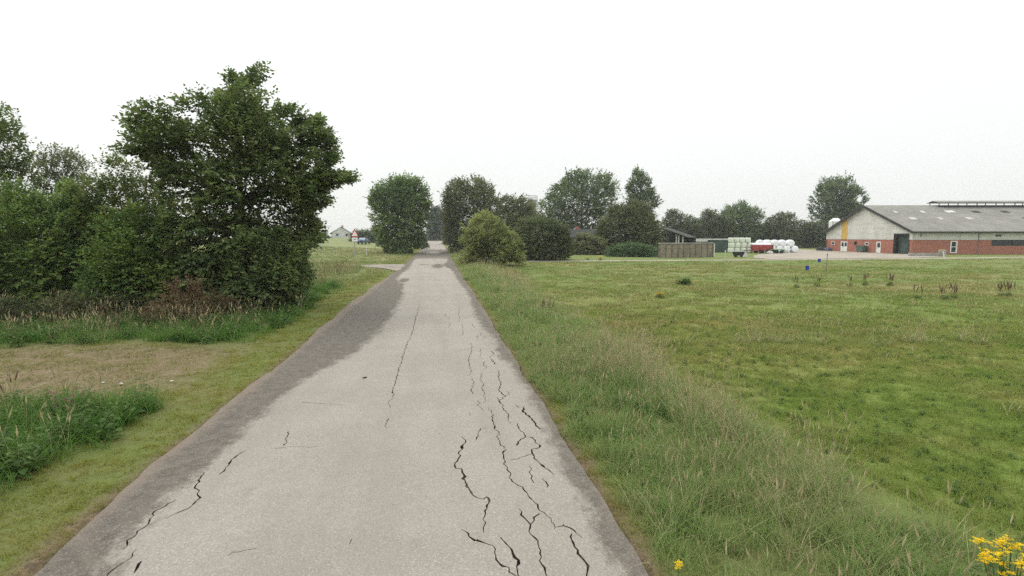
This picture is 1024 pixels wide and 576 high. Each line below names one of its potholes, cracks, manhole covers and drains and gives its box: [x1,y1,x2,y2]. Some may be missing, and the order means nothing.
crack [447,310,590,576]
crack [384,304,420,428]
crack [107,451,244,576]
